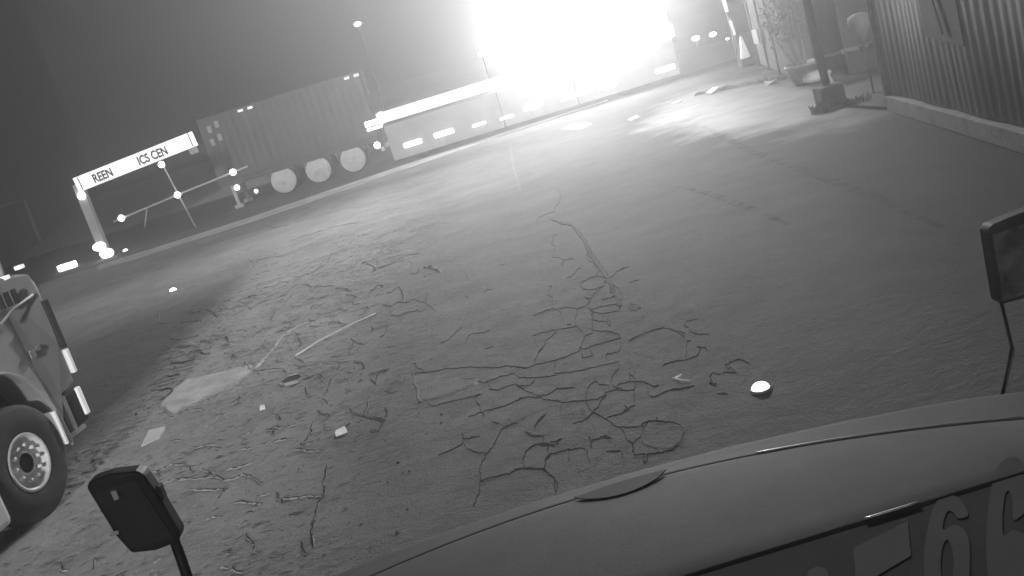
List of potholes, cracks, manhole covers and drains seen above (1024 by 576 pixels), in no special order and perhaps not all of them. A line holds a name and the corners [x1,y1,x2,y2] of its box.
pothole [279,373,304,386]
crack [5,188,749,576]
